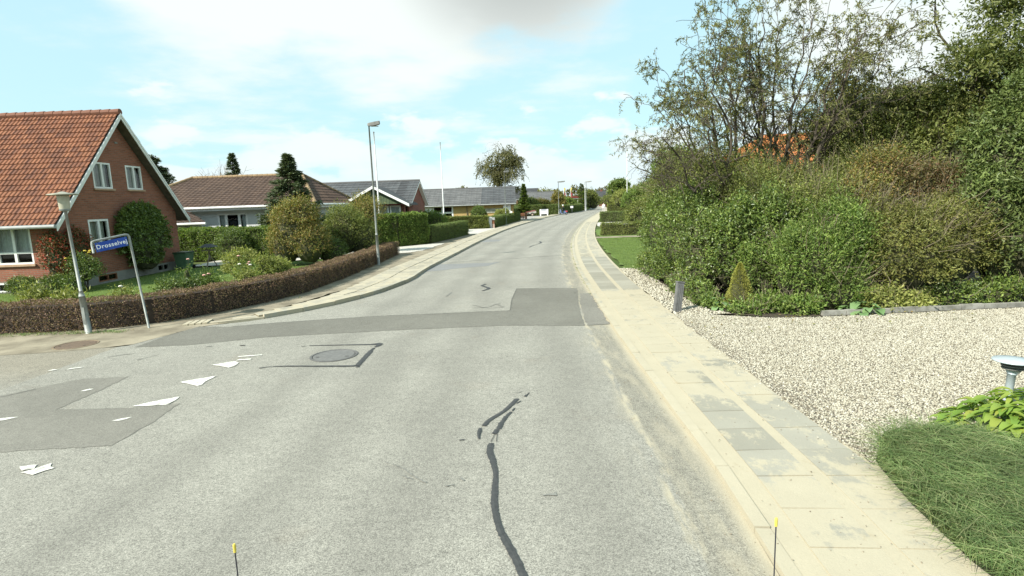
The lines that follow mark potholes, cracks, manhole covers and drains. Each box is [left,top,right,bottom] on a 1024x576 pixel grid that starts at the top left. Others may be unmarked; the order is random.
manhole cover [51,340,100,350]
manhole cover [309,349,358,362]
